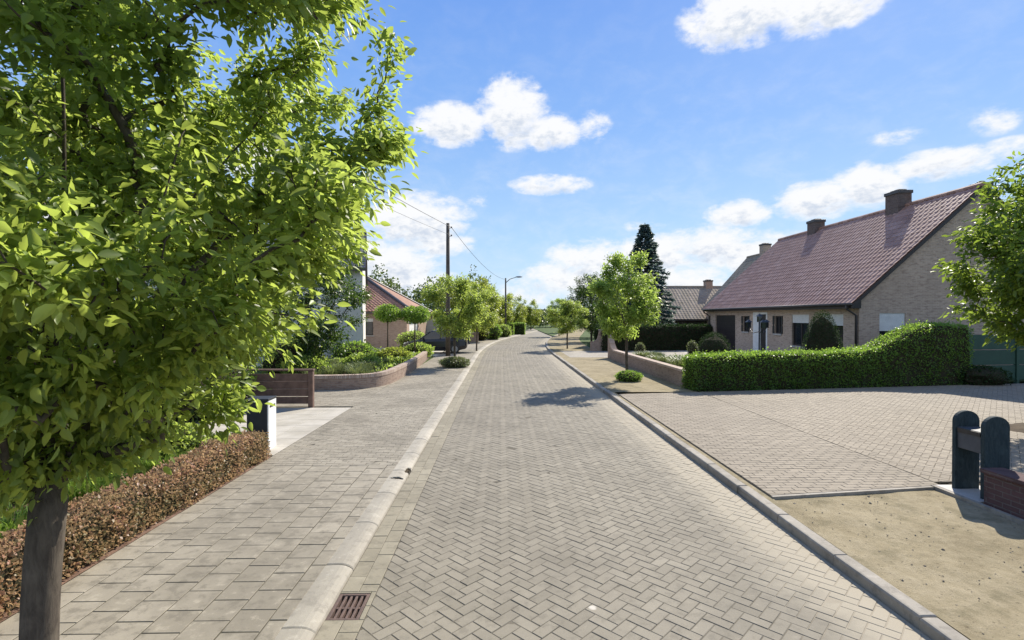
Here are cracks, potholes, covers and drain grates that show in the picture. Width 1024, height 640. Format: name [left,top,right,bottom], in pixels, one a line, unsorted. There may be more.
drain grate [326,592,371,620]
